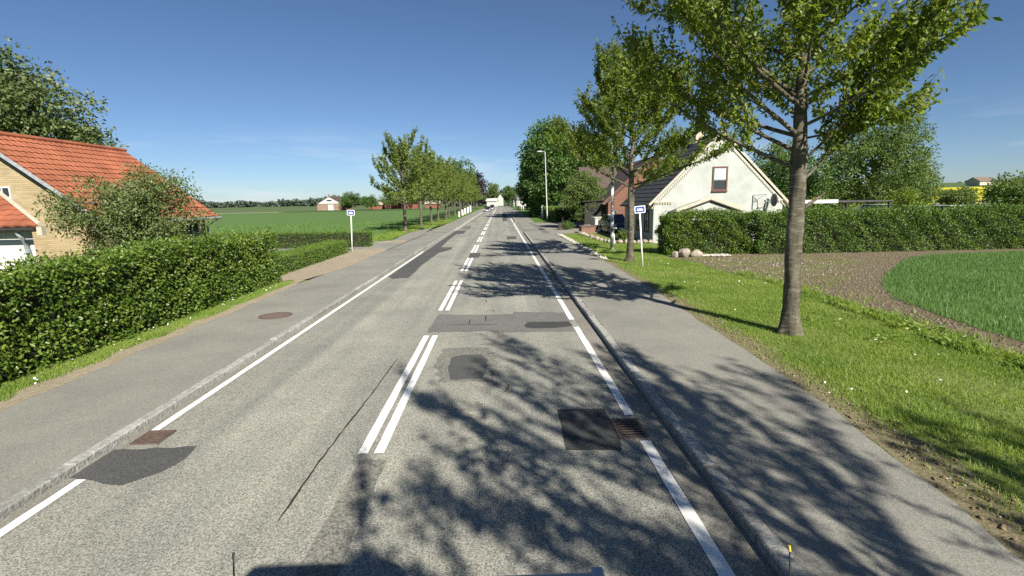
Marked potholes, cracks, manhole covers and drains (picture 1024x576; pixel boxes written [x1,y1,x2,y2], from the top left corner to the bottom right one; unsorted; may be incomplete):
drain grate [610,418,649,439]
crack [277,359,397,522]
